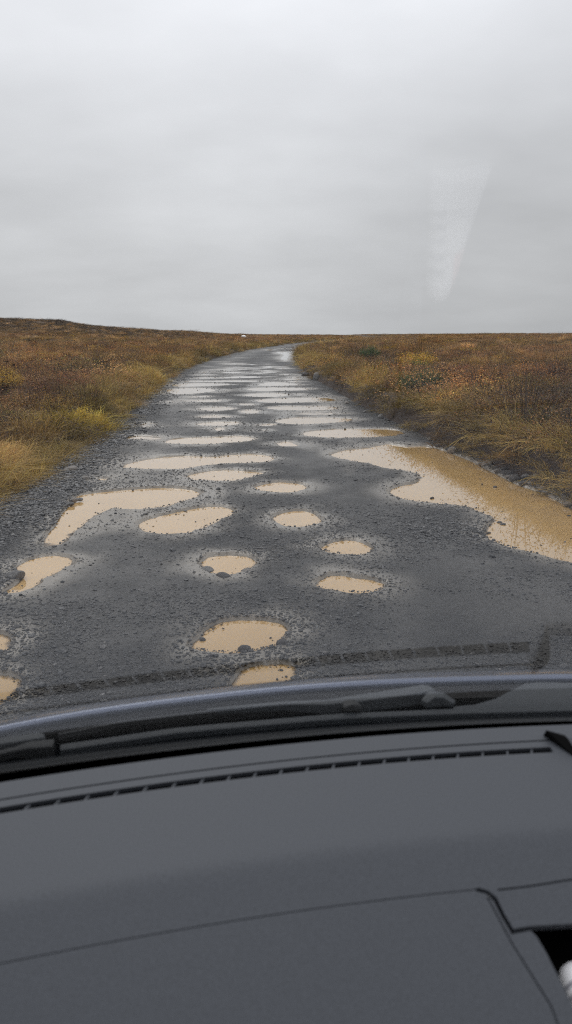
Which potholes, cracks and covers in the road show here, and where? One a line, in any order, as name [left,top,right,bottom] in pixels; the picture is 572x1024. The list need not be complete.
pothole [328,443,572,563]
pothole [133,503,238,534]
pothole [0,552,80,593]
